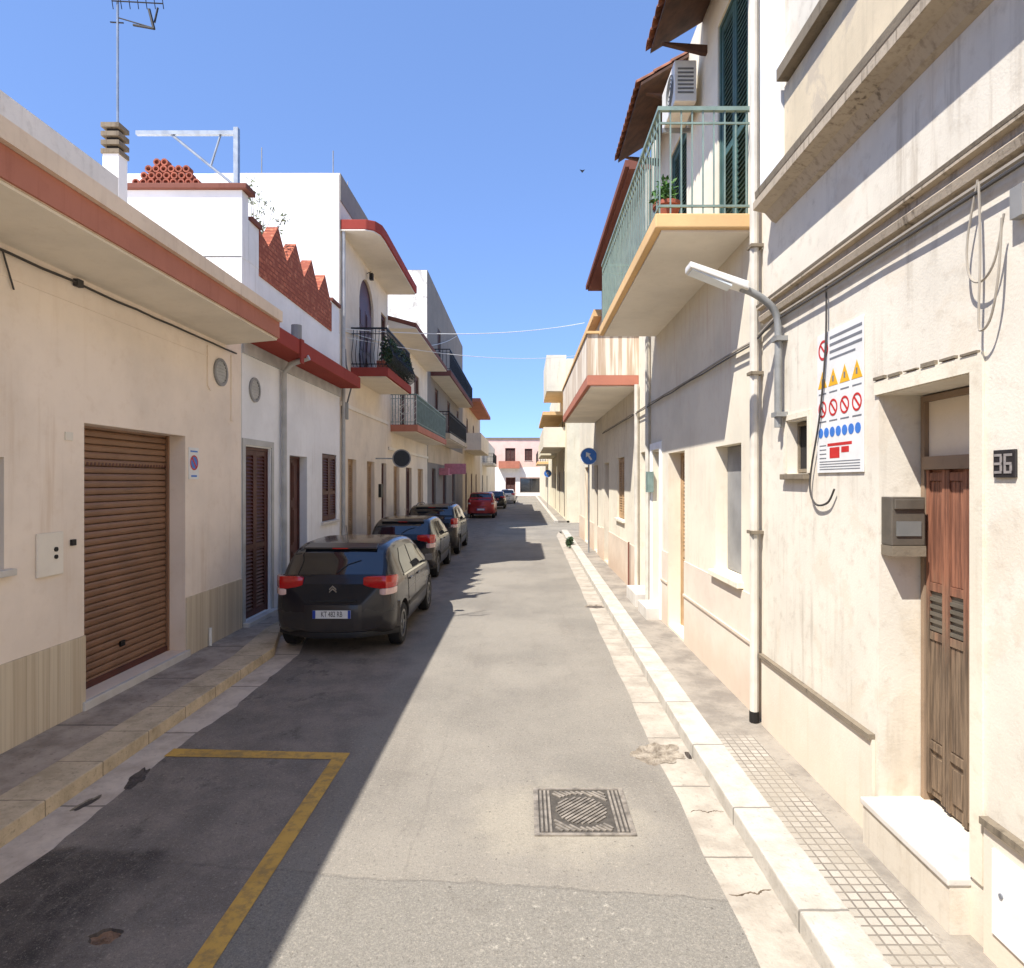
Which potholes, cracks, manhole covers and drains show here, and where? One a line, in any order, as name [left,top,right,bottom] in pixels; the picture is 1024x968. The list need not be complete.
pothole [124,767,150,790]
pothole [630,742,685,766]
pothole [70,794,102,811]
pothole [88,928,124,945]
